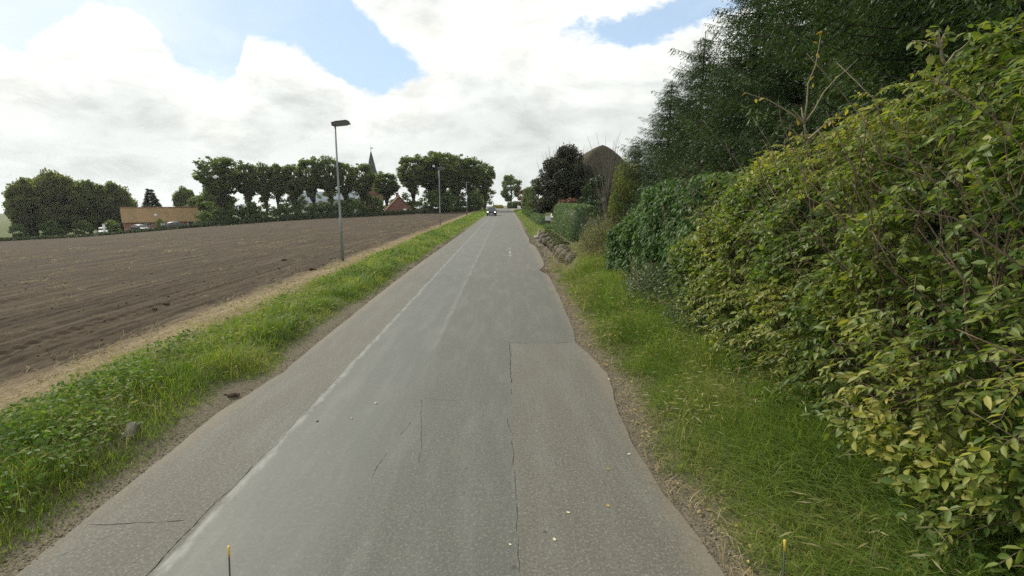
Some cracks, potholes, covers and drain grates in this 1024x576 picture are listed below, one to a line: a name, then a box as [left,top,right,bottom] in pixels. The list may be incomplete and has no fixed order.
crack [56,520,183,571]
